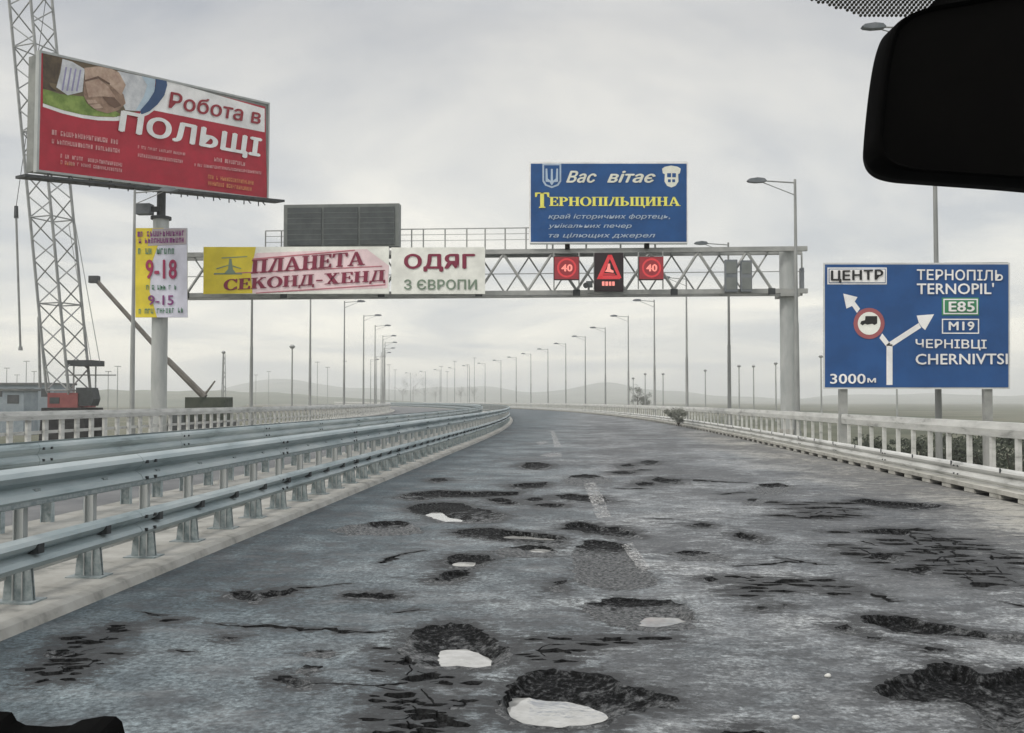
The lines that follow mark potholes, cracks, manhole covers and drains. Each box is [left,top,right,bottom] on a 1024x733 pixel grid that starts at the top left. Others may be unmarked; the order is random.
pothole [452,528,567,548]
pothole [406,502,508,523]
pothole [223,588,298,604]
pothole [518,462,552,470]
pothole [395,490,519,501]
pothole [561,522,643,540]
pothole [872,661,1024,733]
pothole [860,614,1024,644]
crack [25,612,180,683]
pothole [582,597,698,633]
pothole [342,592,401,600]
pothole [495,668,680,732]
